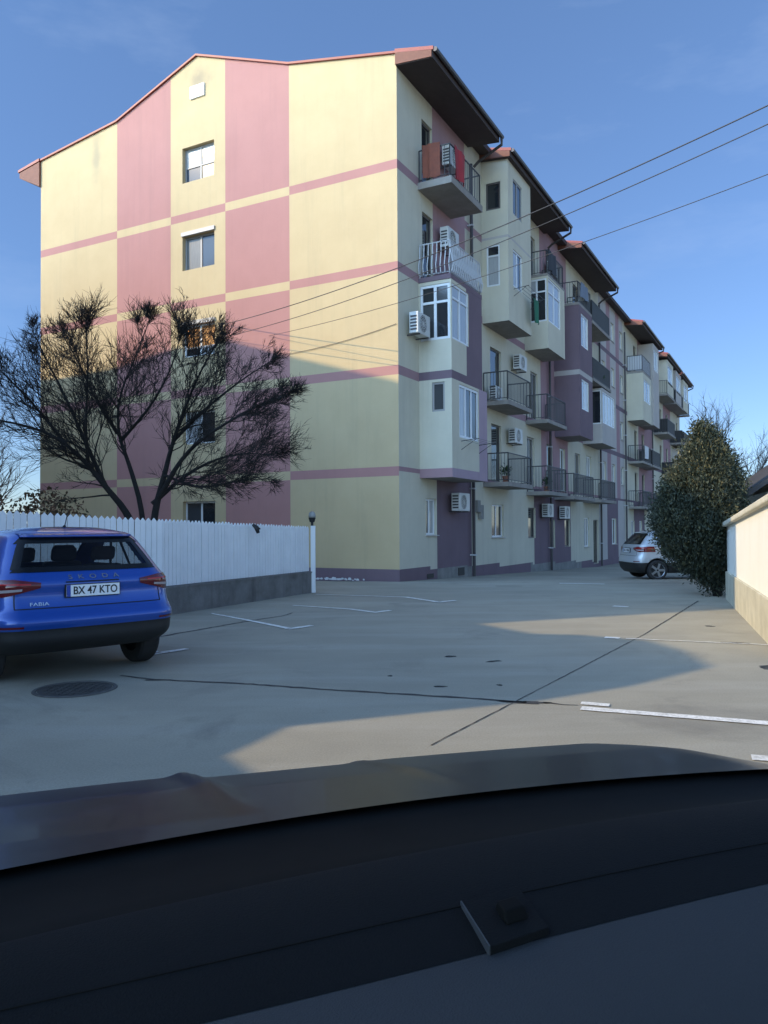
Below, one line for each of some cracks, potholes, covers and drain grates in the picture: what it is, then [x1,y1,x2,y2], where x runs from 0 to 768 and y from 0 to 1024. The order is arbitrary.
manhole cover [31,680,118,698]
